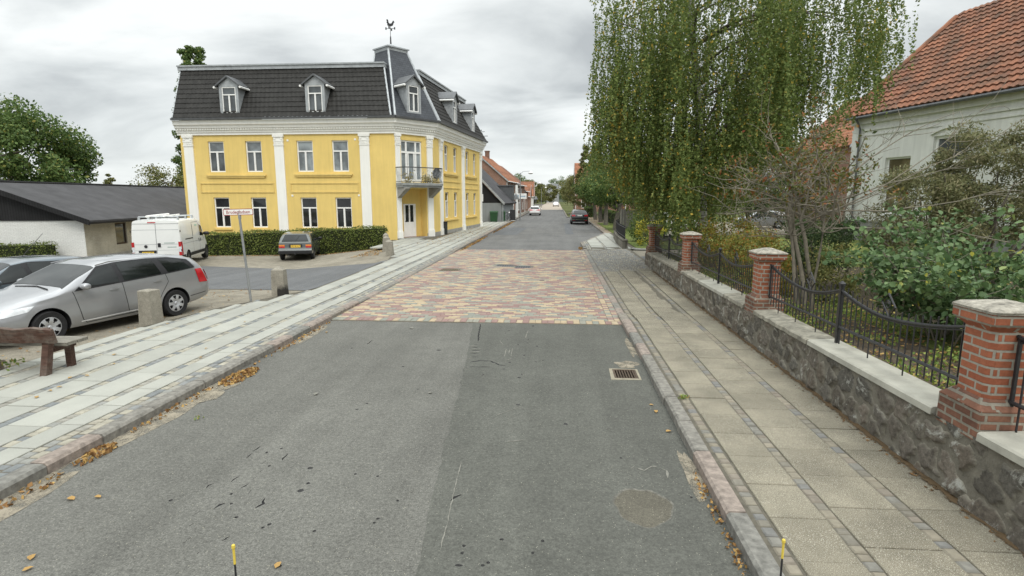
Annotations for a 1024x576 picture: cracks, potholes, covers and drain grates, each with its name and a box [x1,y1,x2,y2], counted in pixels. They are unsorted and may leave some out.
crack [231,447,288,508]
crack [471,324,505,366]
drain grate [609,368,642,380]
